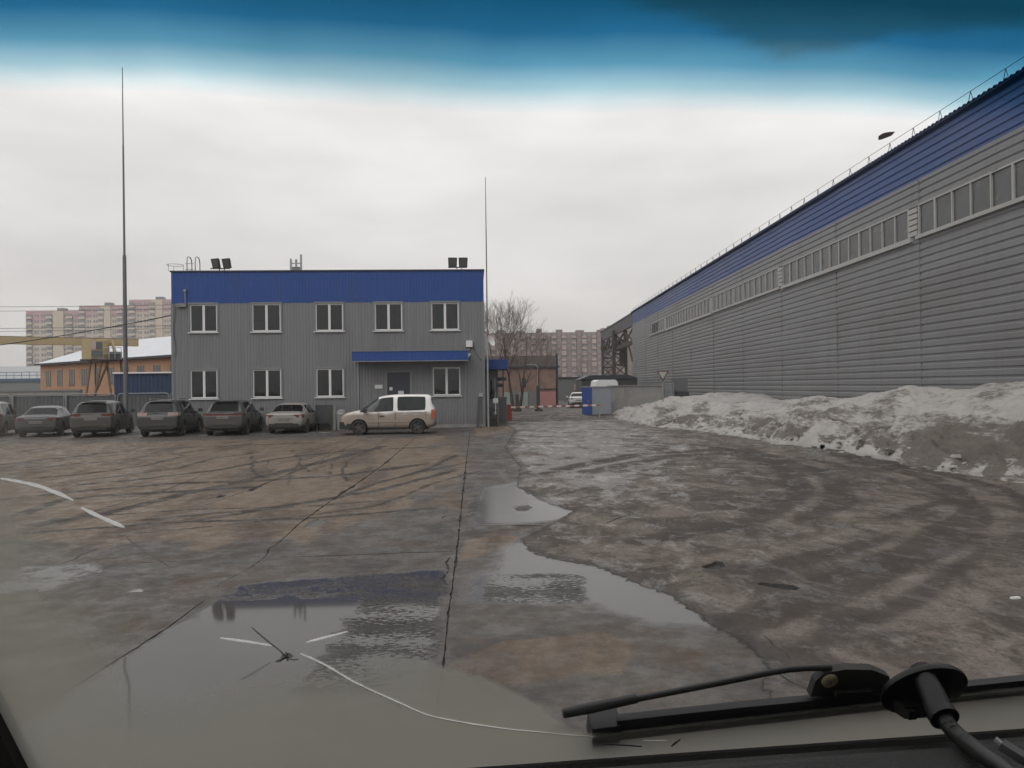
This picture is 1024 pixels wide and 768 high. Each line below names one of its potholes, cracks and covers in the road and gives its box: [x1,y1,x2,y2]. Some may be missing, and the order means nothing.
pothole [702,561,724,569]
pothole [757,582,800,591]
